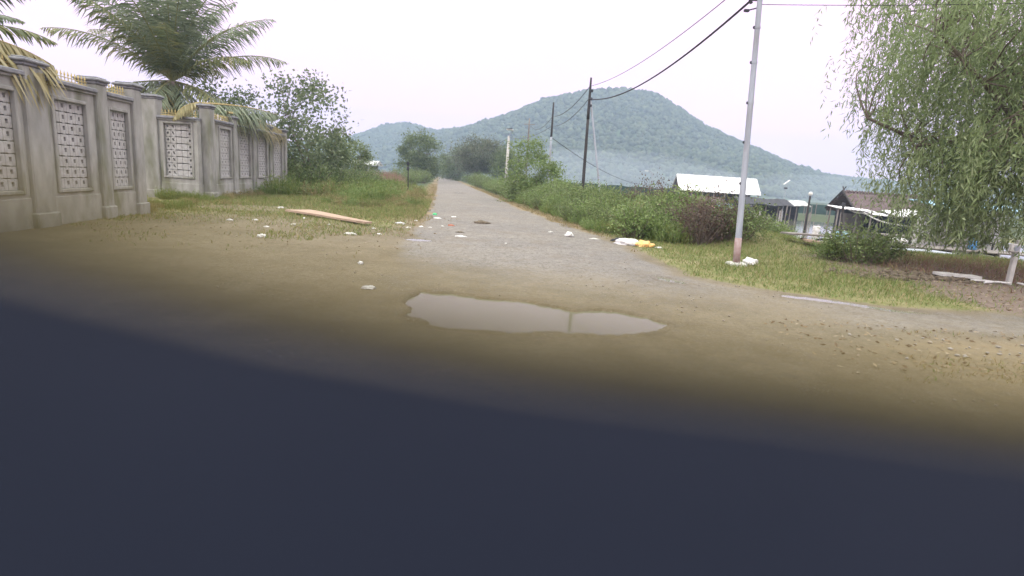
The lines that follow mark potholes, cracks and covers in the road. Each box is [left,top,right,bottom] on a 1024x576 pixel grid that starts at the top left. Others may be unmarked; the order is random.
pothole [411,288,678,334]
